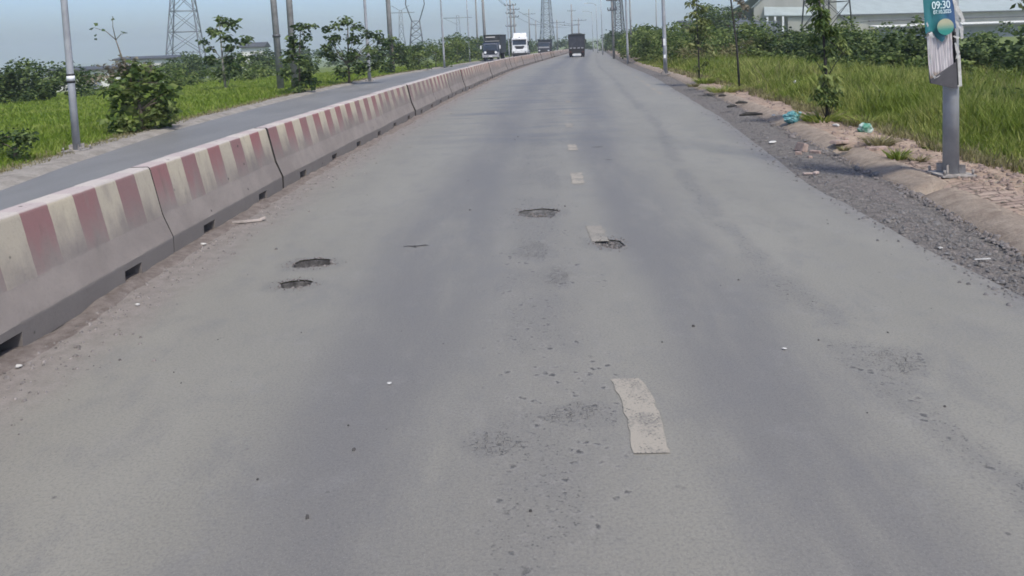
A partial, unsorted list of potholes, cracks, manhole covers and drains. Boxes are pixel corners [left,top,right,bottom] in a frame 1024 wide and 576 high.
pothole [270,276,320,290]
pothole [281,257,346,271]
pothole [500,207,567,220]
pothole [589,235,631,252]
